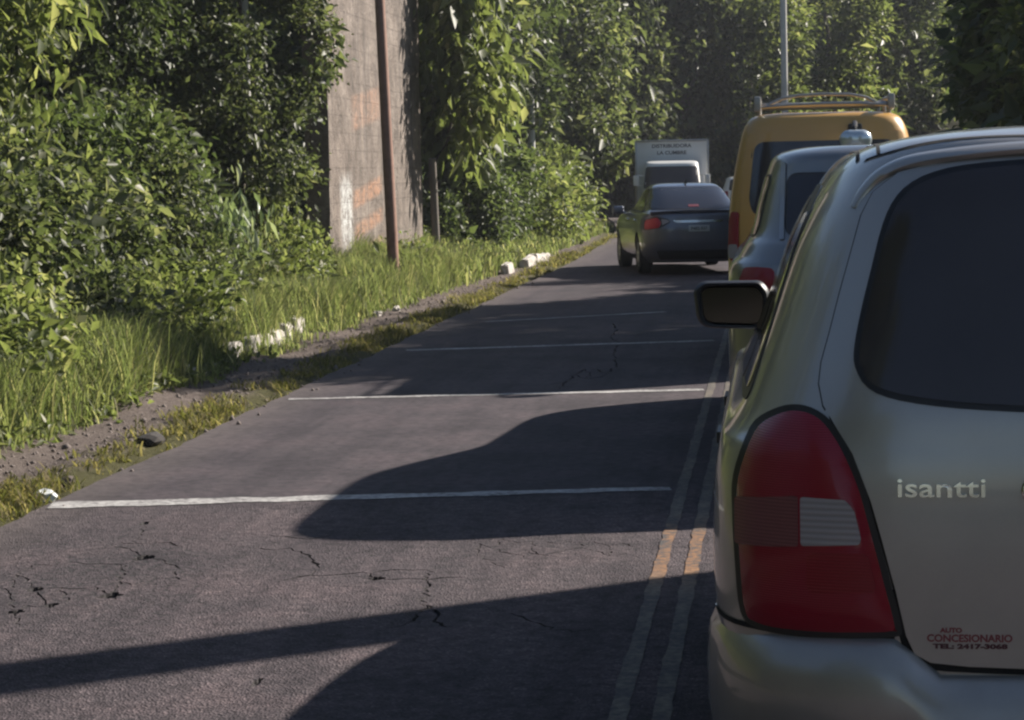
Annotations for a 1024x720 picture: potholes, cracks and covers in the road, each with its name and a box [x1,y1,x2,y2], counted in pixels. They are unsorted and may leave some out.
crack [550,323,620,389]
crack [0,525,185,626]
crack [464,539,633,568]
crack [260,534,447,628]
crack [511,613,591,632]
